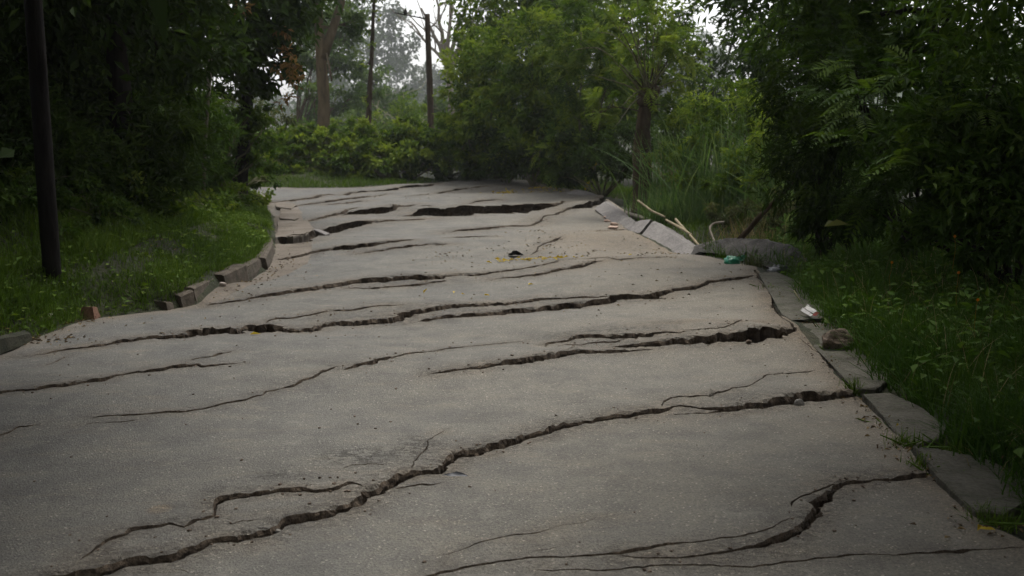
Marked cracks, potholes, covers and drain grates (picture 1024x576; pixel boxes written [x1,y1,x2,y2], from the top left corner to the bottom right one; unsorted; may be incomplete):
crack [0,183,1024,576]
